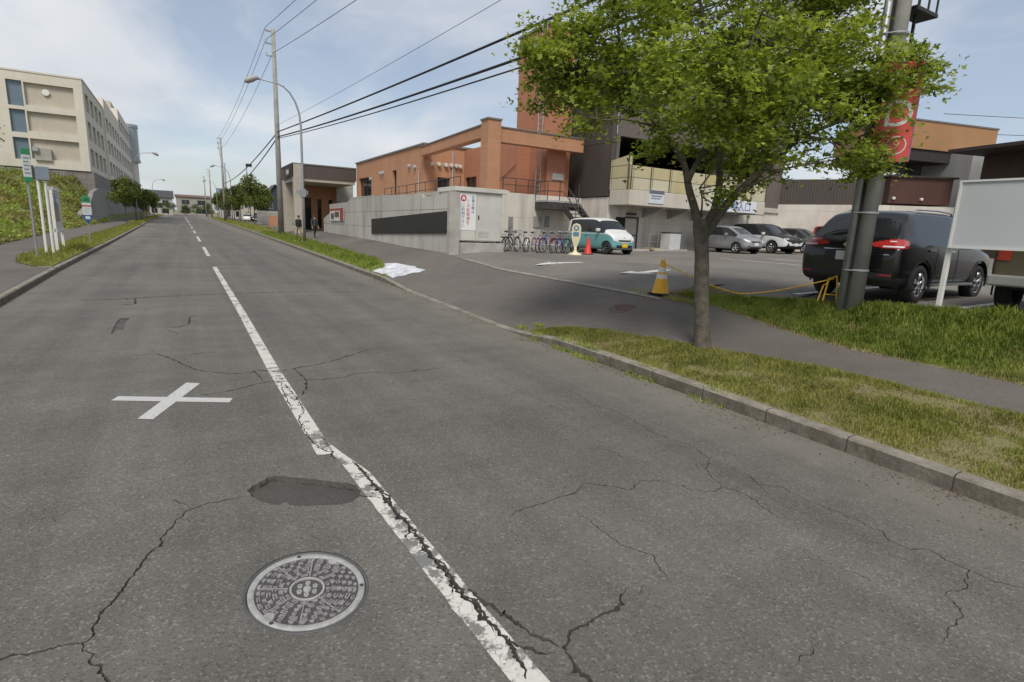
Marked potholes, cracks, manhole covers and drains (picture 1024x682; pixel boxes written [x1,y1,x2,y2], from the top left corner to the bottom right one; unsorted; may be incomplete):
crack [137,348,446,461]
crack [352,390,1024,682]
crack [0,496,247,682]
pothole [247,476,361,506]
manhole cover [242,552,369,634]
manhole cover [611,303,640,313]
